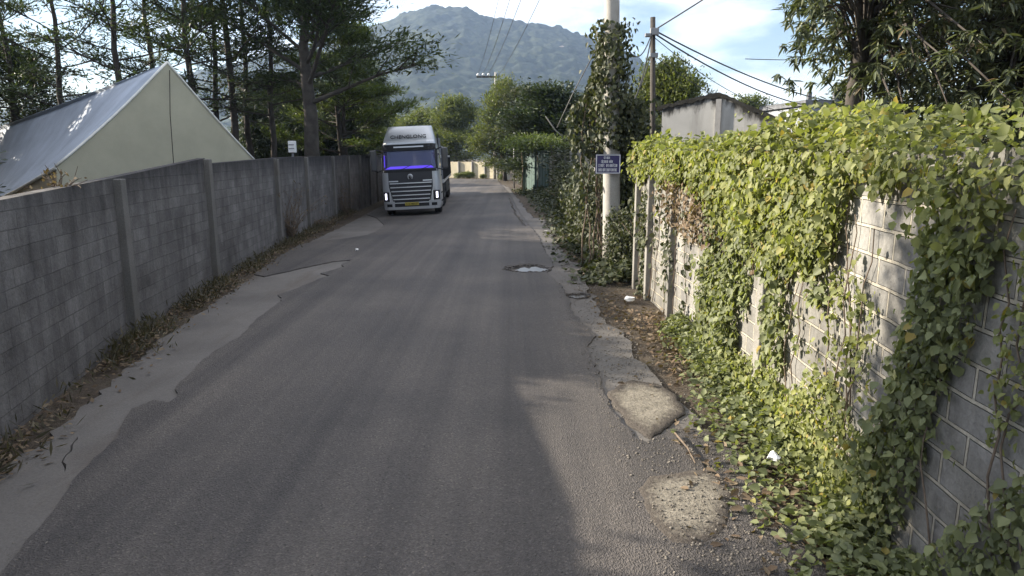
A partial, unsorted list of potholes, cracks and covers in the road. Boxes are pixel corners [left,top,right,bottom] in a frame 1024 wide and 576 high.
pothole [502,263,552,272]
